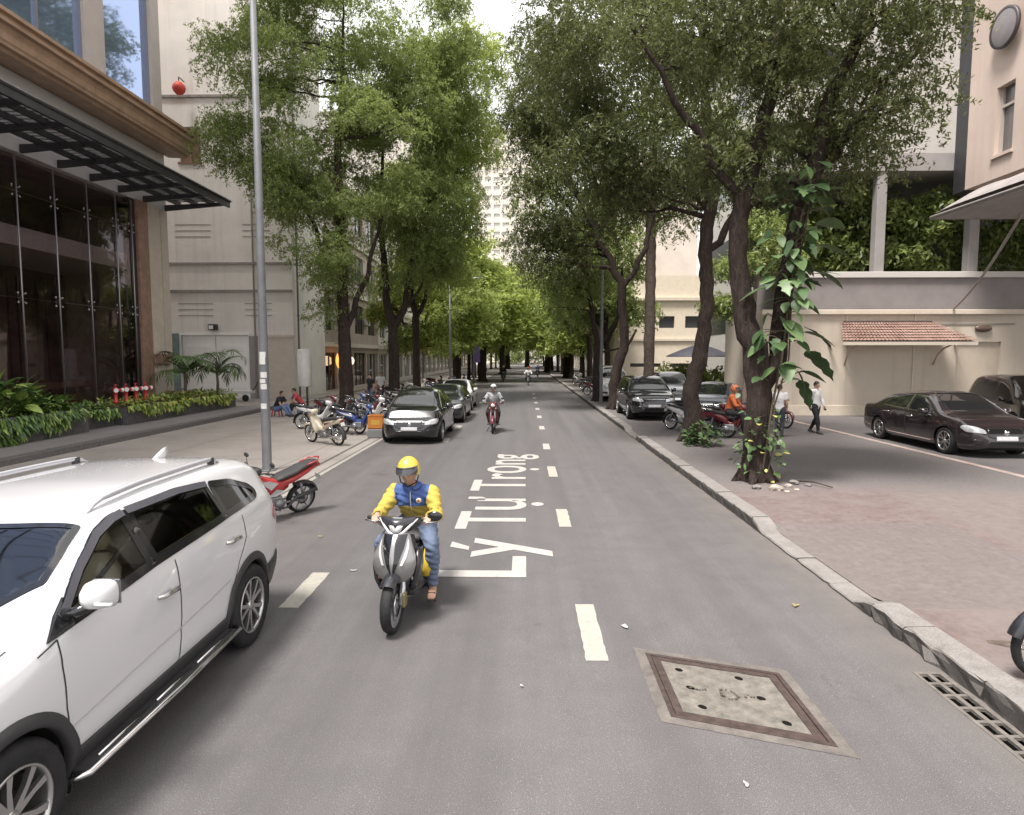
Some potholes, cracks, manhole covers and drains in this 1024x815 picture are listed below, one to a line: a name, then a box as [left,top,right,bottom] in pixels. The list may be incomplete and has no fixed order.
drain grate [912,672,1024,763]
manhole cover [633,647,860,759]
